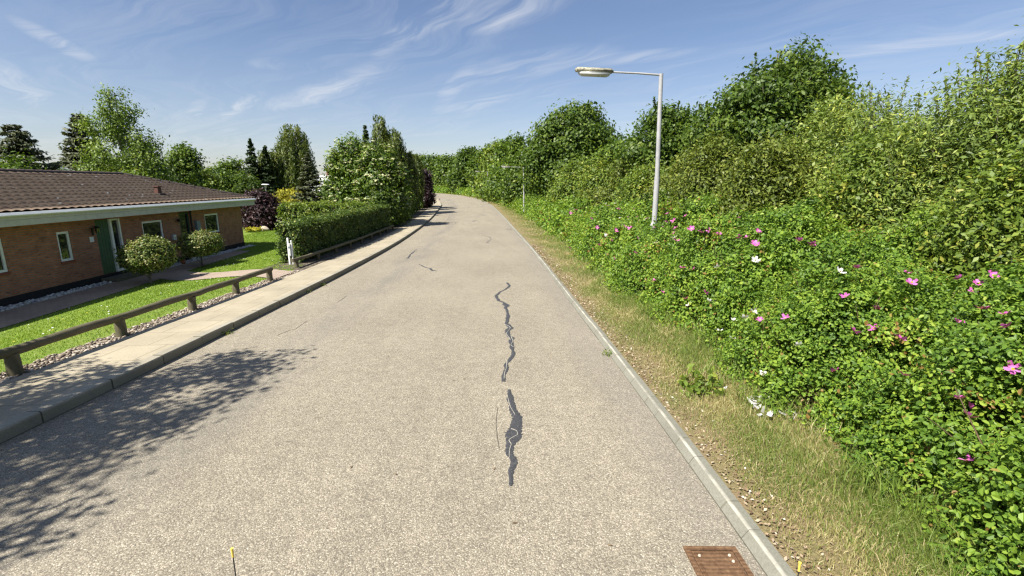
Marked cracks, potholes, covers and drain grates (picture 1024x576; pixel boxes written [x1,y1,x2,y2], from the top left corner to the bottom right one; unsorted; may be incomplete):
manhole cover [683,546,754,576]
